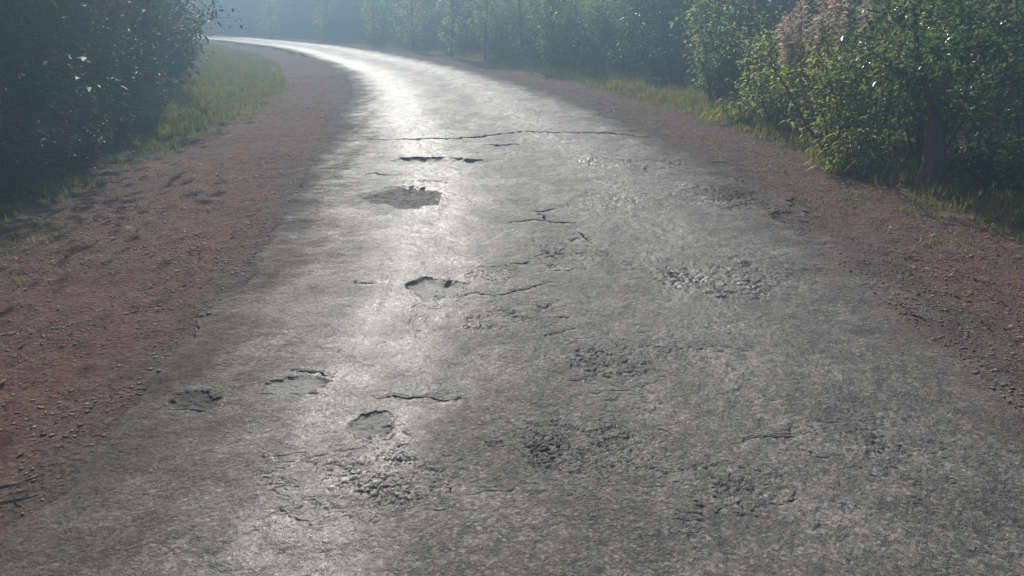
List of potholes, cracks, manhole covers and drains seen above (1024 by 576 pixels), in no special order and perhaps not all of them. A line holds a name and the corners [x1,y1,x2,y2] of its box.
pothole [378,156,492,166]
pothole [162,386,226,412]
pothole [254,374,334,395]
pothole [349,184,456,211]
pothole [400,274,472,302]
pothole [345,409,398,444]
crack [249,131,966,526]
